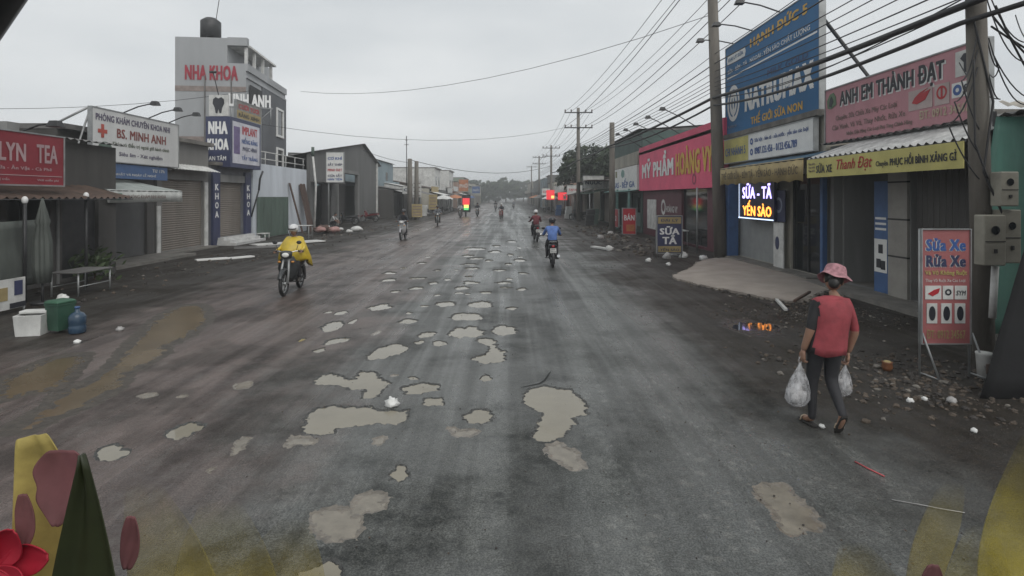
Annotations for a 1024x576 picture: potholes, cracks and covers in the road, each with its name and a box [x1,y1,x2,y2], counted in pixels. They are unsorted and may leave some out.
pothole [312,370,393,399]
pothole [300,404,412,436]
pothole [445,325,488,339]
pothole [470,337,508,364]
pothole [461,408,497,425]
pothole [399,382,441,395]
pothole [93,442,132,462]
pothole [364,342,411,361]
pothole [388,464,412,483]
